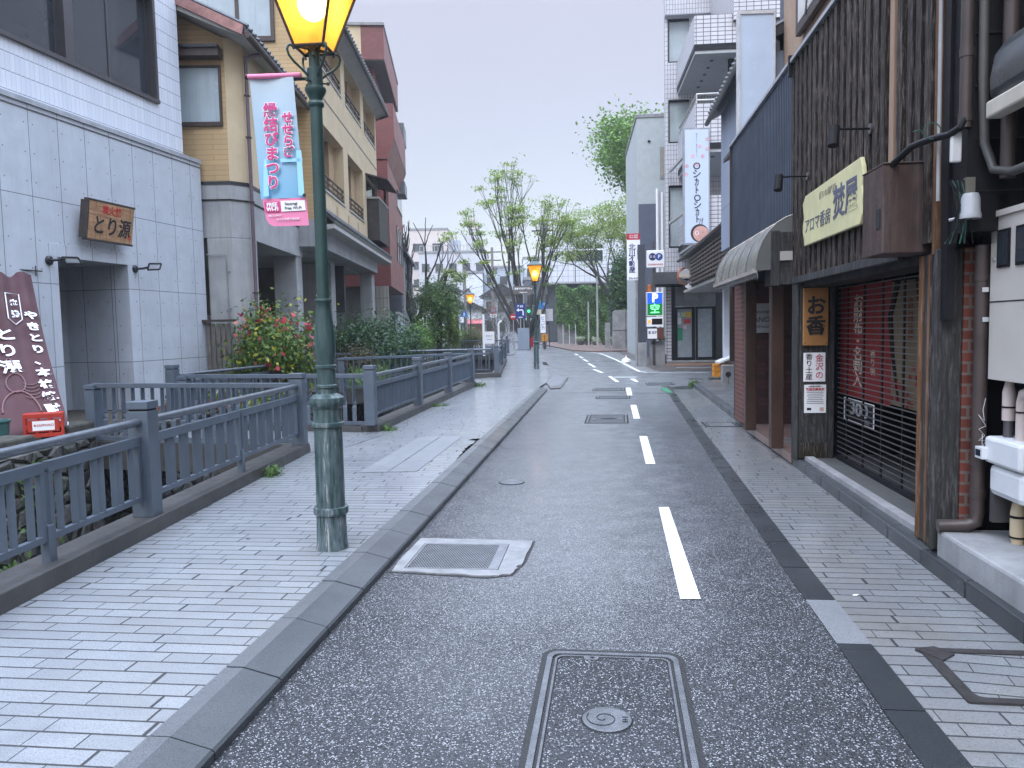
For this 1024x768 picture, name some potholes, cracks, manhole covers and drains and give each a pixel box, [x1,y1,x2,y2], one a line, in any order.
manhole cover [584,414,629,424]
drain grate [390,538,535,578]
manhole cover [915,646,1024,706]
manhole cover [518,649,706,768]
